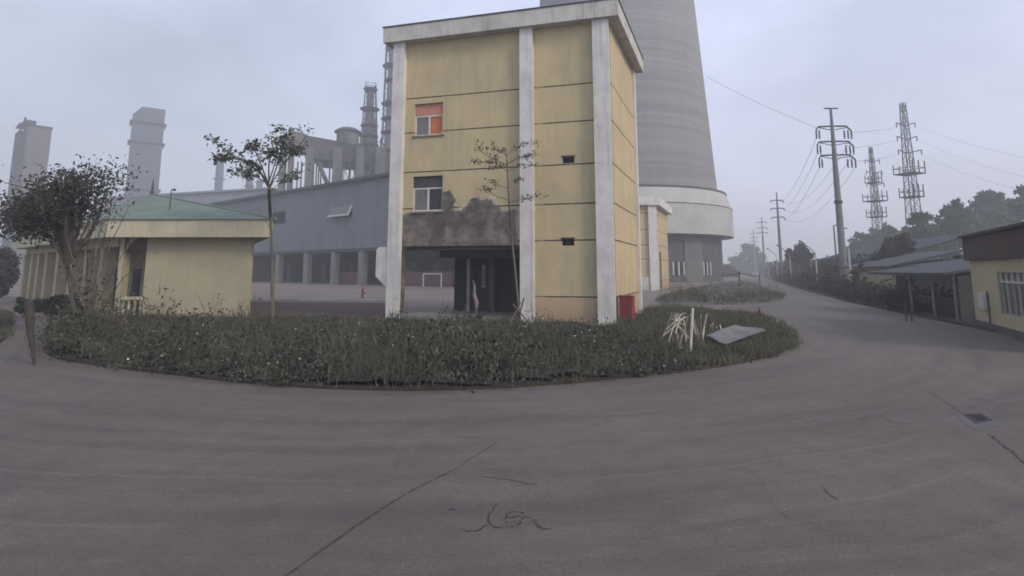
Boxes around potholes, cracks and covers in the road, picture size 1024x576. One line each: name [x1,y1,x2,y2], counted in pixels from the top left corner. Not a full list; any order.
crack [448,503,552,531]
crack [454,436,536,486]
